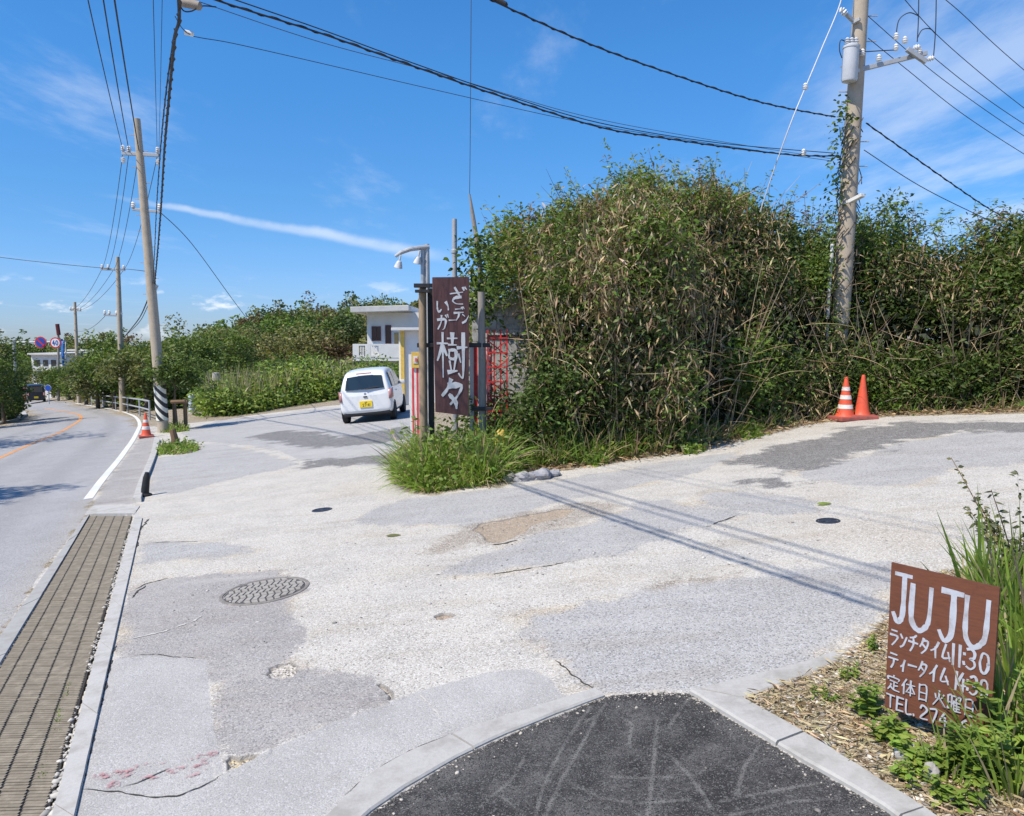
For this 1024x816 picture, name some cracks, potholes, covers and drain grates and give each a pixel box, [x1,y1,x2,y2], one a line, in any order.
pothole [212,747,273,779]
pothole [466,507,580,544]
drain grate [0,641,97,703]
pothole [255,658,309,684]
drain grate [39,571,117,603]
drain grate [15,601,108,643]
drain grate [0,788,54,816]
crack [82,616,219,798]
drain grate [0,698,80,790]
drain grate [82,516,133,531]
pothole [425,610,466,623]
drain grate [57,548,123,572]
